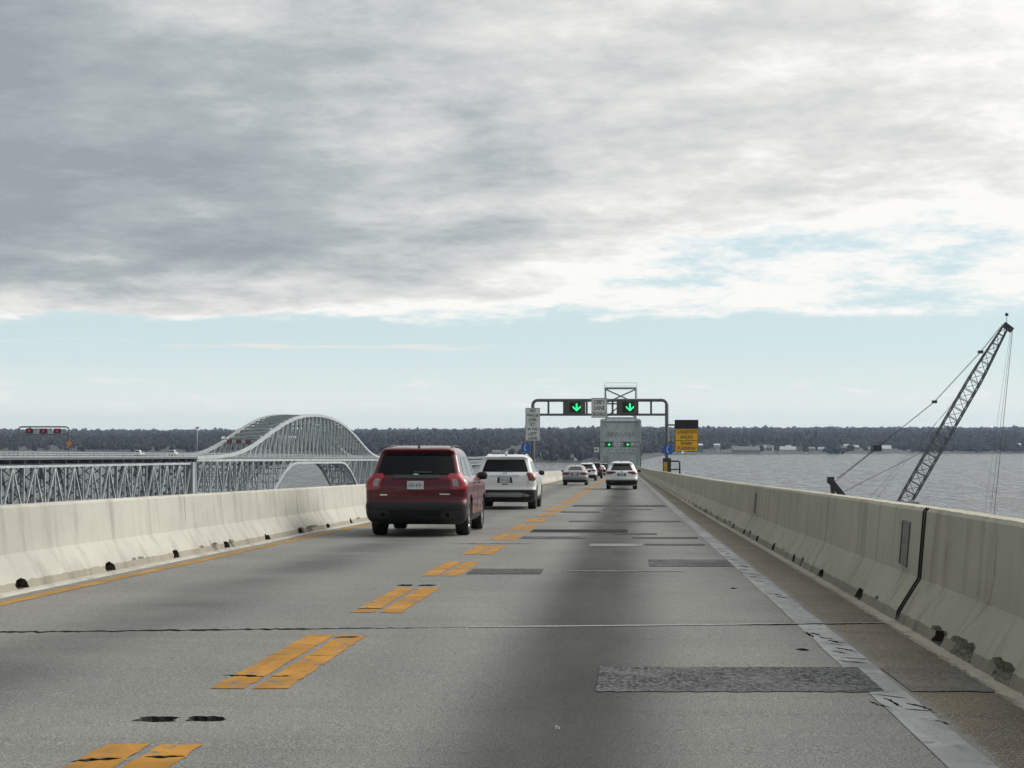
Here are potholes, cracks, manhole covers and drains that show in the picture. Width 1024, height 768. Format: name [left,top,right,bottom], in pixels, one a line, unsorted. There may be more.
crack [869,695,950,725]
crack [775,623,883,663]
